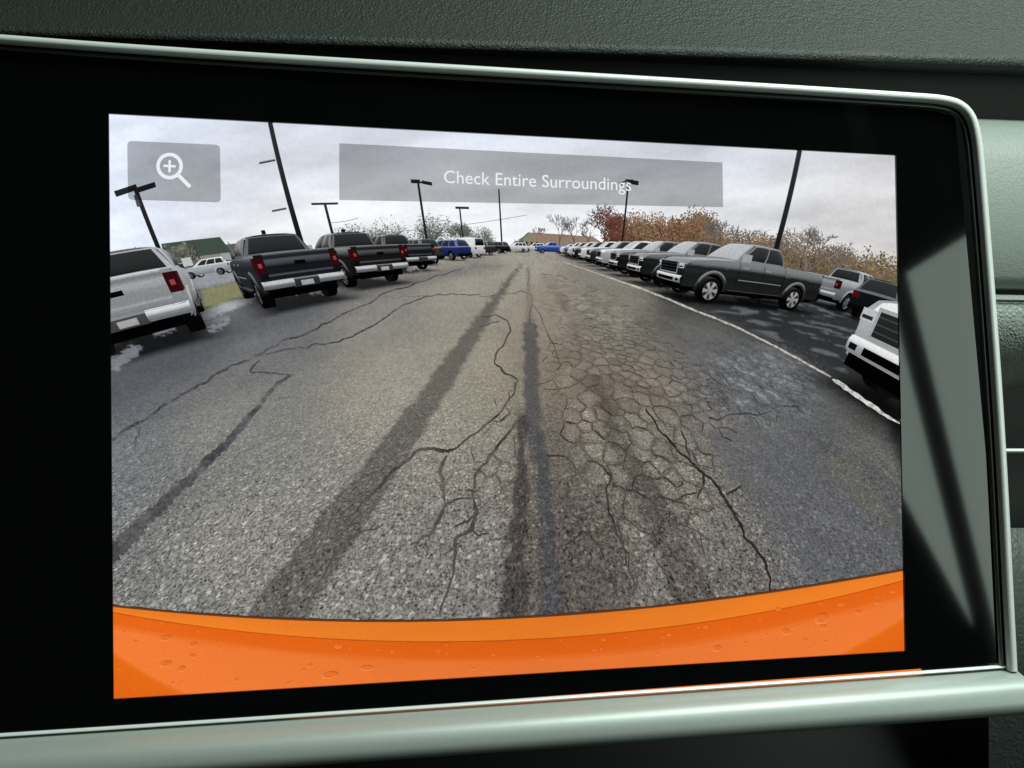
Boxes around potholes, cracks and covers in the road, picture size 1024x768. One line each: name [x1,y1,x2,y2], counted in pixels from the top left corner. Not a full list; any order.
crack [540,316,826,596]
crack [112,268,648,615]
